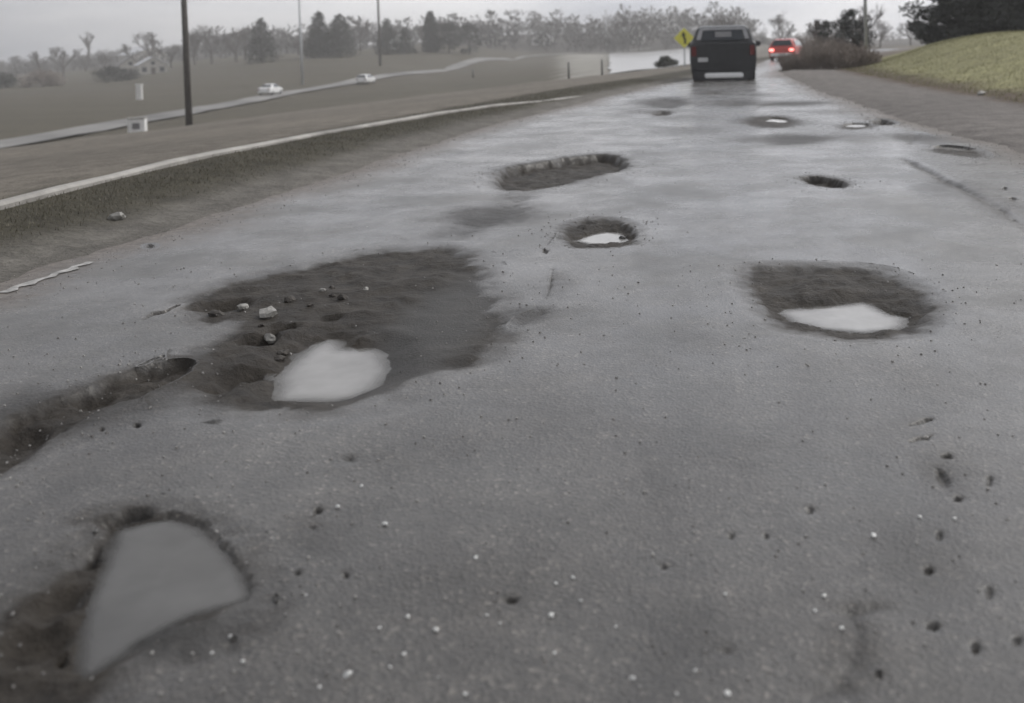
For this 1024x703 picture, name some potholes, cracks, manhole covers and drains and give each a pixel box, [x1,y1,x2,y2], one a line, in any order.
pothole [737,115,805,128]
pothole [547,216,653,249]
pothole [832,122,880,130]
pothole [0,355,197,486]
crack [541,268,558,300]
pothole [0,493,304,703]
pothole [144,242,535,427]
pothole [722,260,958,344]
pothole [923,145,994,158]
pothole [793,174,857,188]
pothole [480,152,642,192]
crack [895,157,1024,232]
